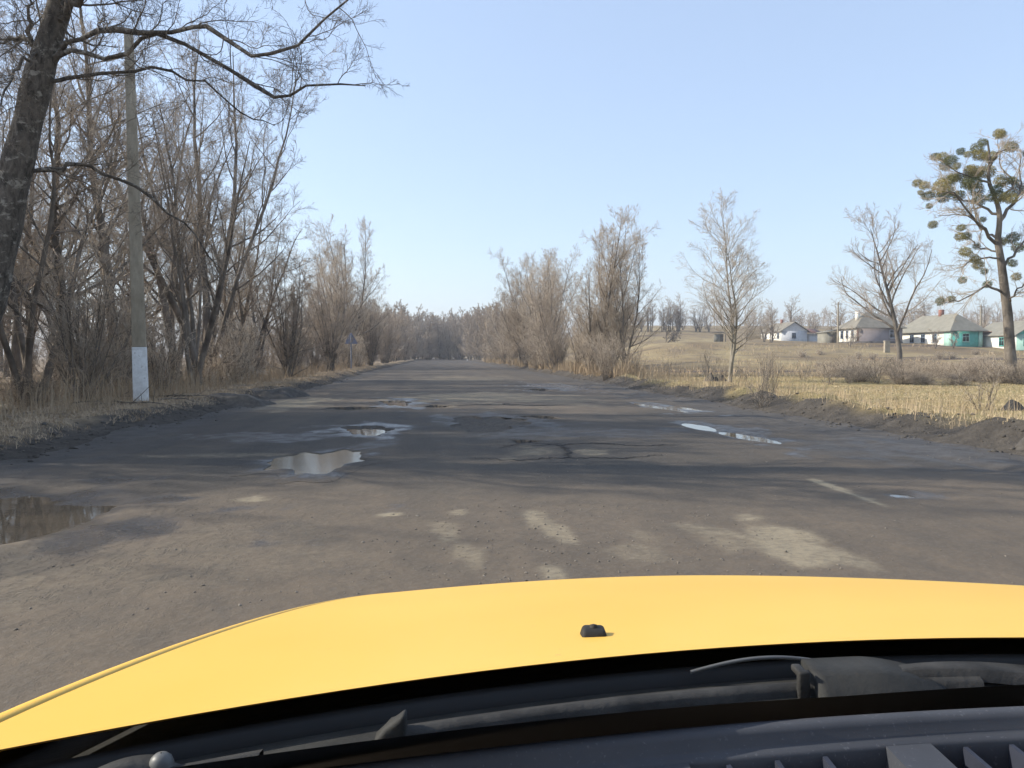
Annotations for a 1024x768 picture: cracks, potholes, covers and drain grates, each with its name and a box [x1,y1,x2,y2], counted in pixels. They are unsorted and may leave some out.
crack [472,442,668,460]
pothole [324,423,411,440]
pothole [437,414,546,438]
pothole [230,444,391,484]
